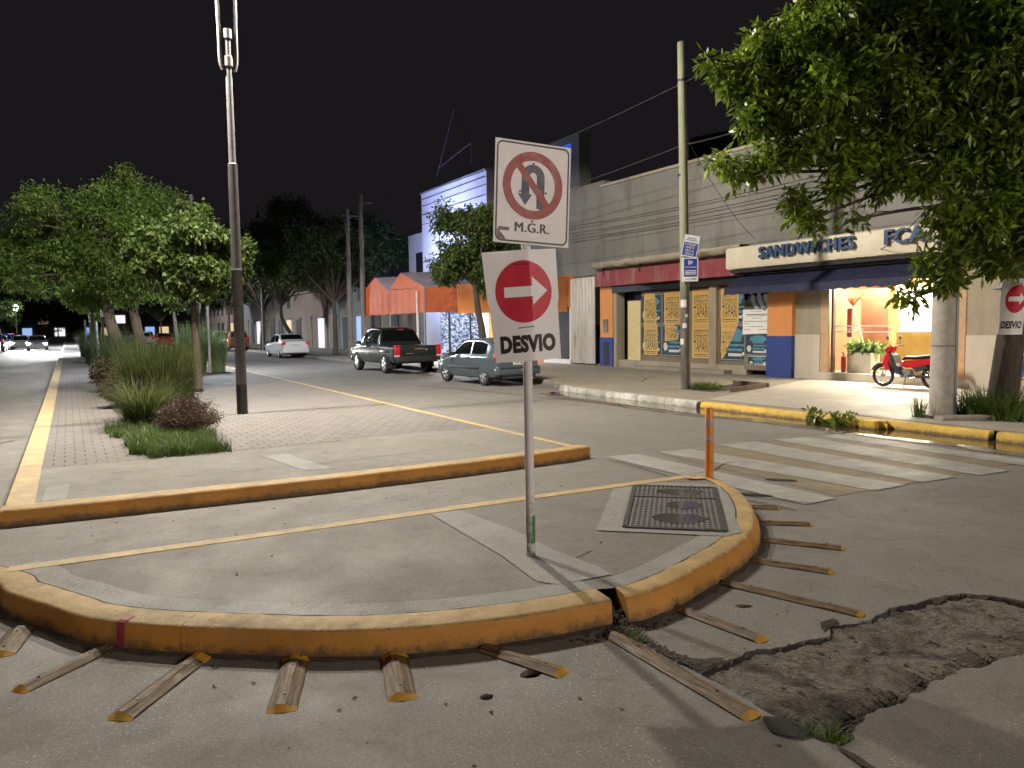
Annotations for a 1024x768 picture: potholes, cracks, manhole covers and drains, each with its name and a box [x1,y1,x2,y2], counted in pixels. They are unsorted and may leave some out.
crack [609,625,727,670]
pothole [520,669,541,678]
drain grate [622,484,728,532]
pothole [698,593,1024,746]
